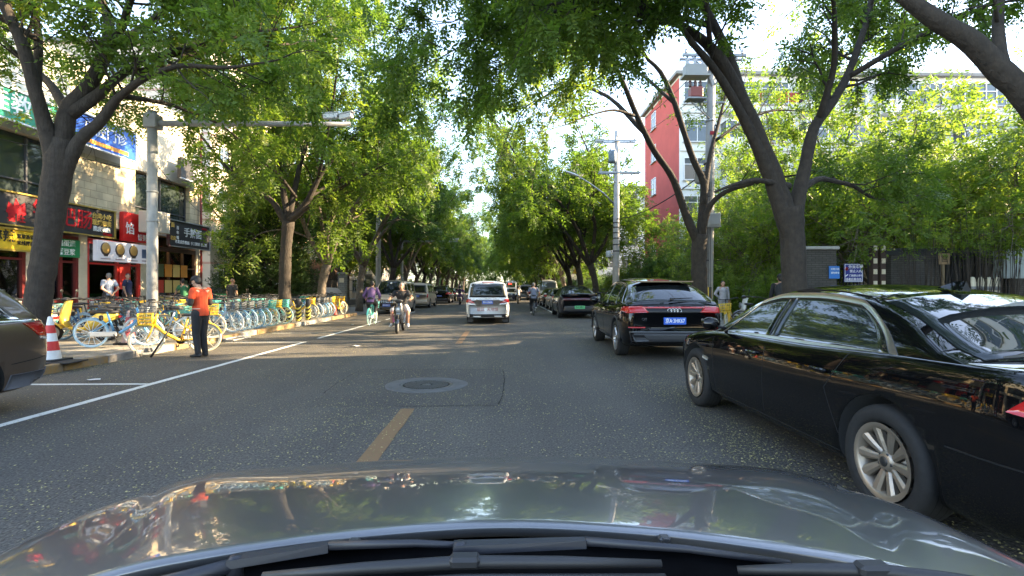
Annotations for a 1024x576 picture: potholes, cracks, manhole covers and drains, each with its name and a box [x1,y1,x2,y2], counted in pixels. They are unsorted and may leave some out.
manhole cover [385,377,468,393]
